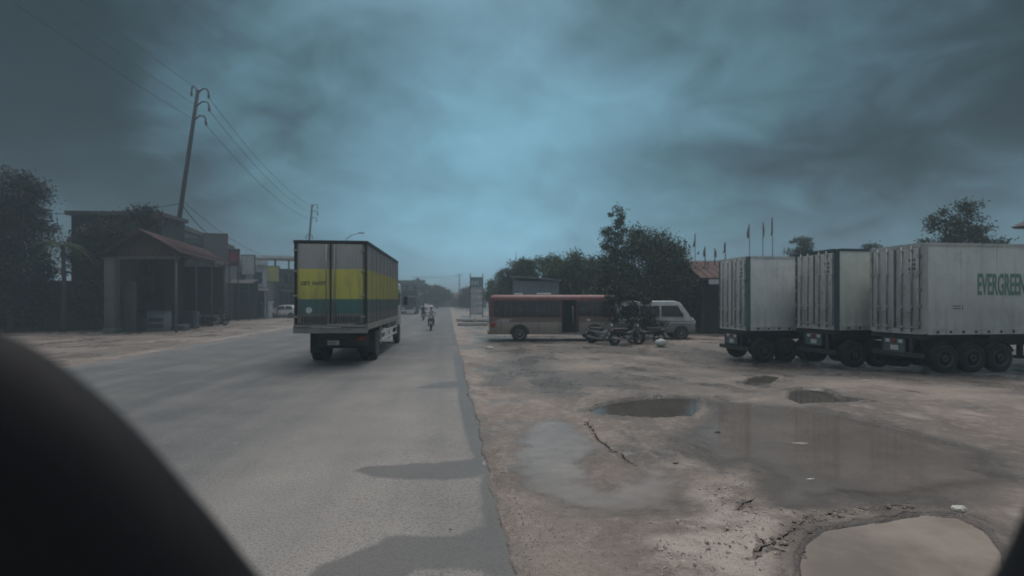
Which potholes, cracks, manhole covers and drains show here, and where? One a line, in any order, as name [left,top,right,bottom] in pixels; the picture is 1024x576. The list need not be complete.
crack [584,419,637,466]
pothole [780,387,871,406]
pothole [582,394,707,420]
crack [735,498,927,561]
pothole [781,509,1010,576]
pothole [738,374,784,388]
